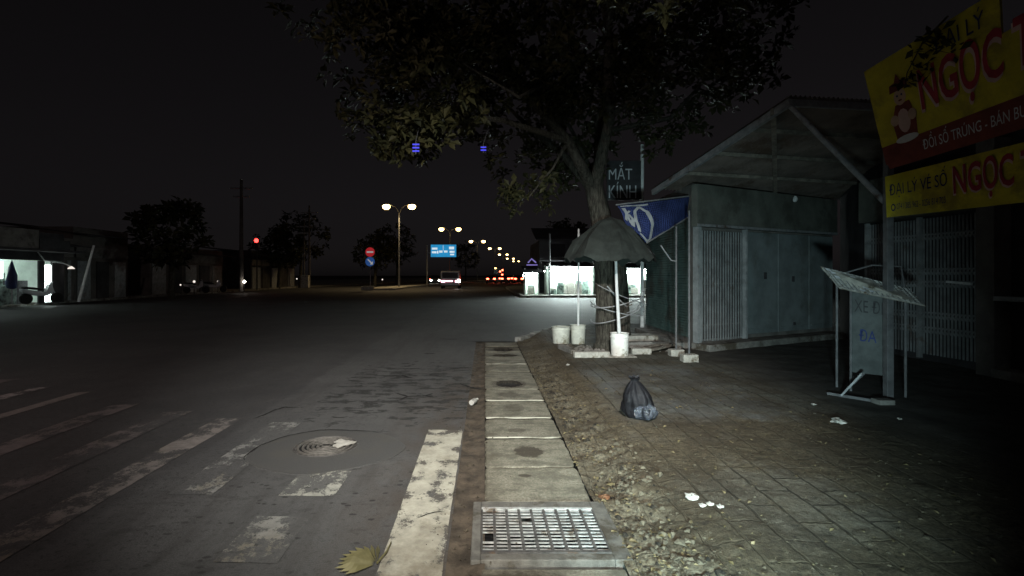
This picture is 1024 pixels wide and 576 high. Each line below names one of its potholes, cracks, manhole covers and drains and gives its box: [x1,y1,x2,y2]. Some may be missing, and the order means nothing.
manhole cover [293,436,358,457]
drain grate [470,502,633,576]
